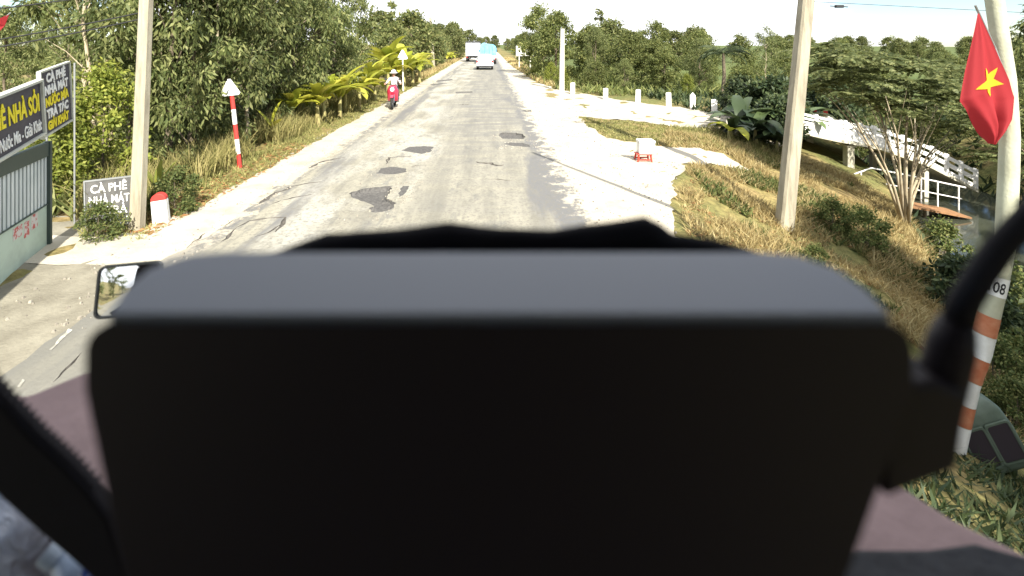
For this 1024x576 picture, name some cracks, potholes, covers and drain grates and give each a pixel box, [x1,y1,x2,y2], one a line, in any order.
pothole [401,146,434,154]
pothole [349,186,396,212]
crack [55,352,82,380]
crack [189,157,344,246]
